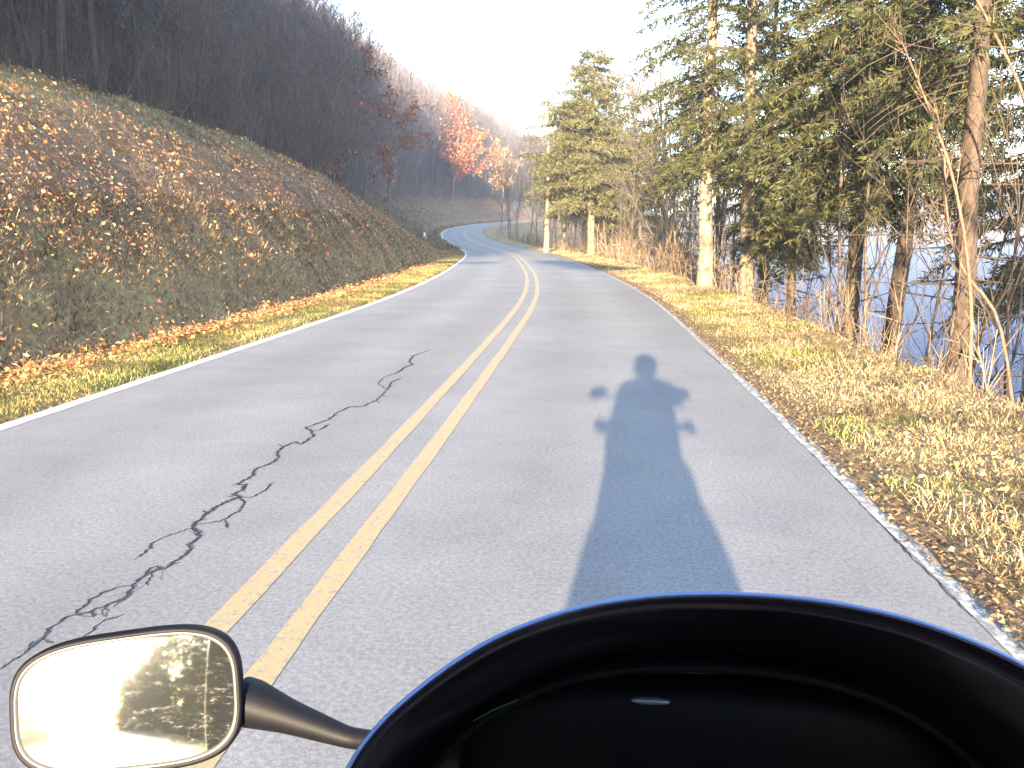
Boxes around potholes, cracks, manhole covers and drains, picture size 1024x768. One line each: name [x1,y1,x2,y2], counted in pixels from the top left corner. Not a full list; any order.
crack [0,350,428,669]
